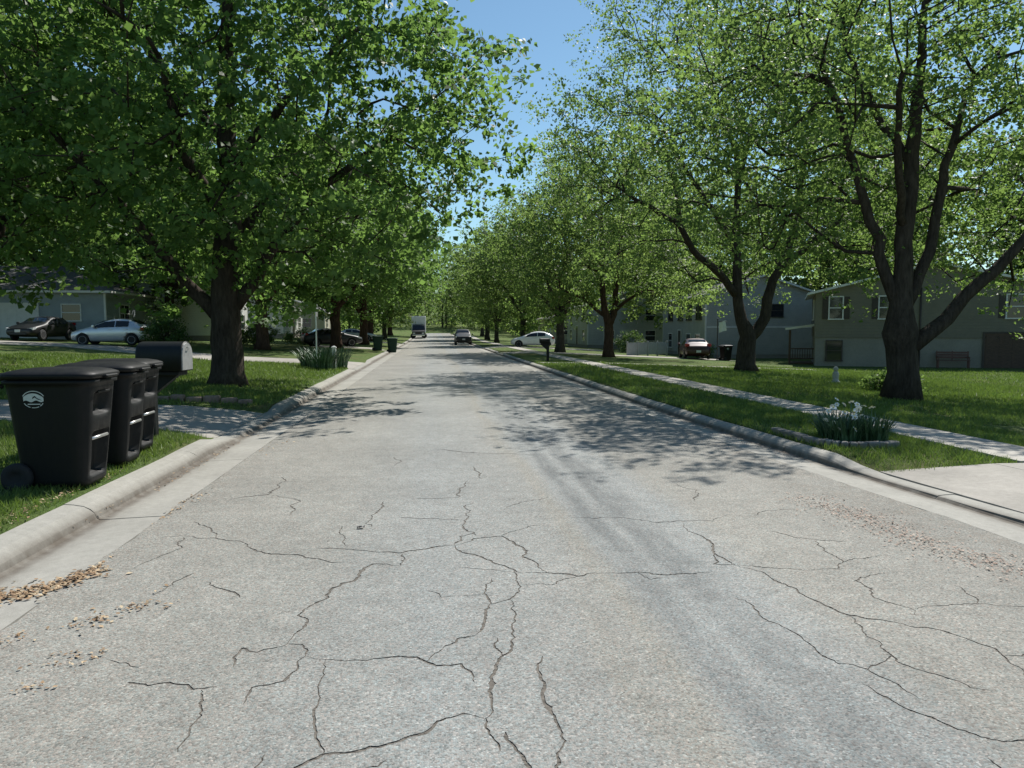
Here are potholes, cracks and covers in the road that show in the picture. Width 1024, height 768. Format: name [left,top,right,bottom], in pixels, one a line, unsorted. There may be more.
crack [417,449,528,499]
crack [142,503,1024,768]
crack [107,659,212,752]
crack [234,477,301,515]
